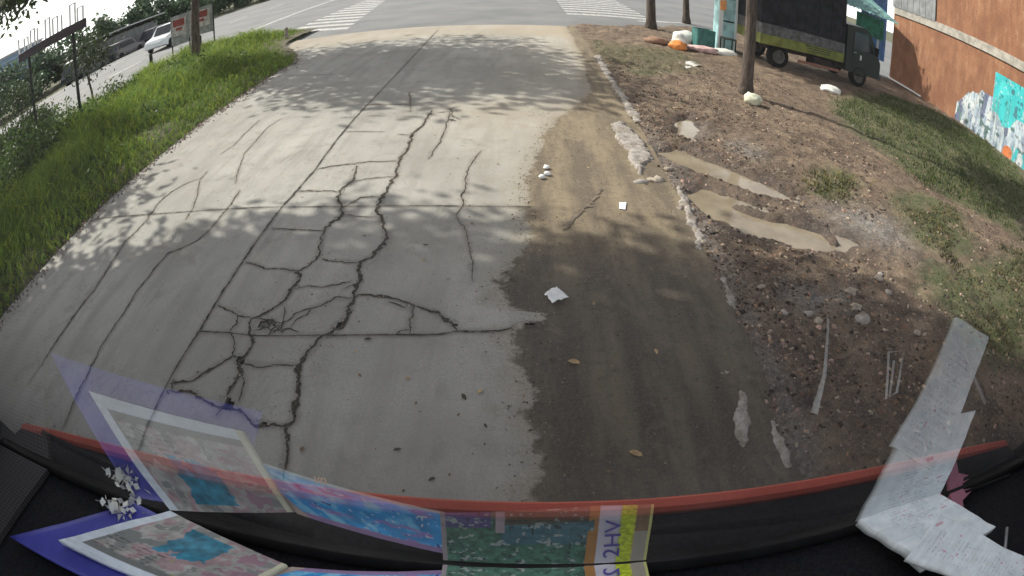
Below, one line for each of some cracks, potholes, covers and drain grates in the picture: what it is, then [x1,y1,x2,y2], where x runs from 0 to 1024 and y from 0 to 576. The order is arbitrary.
crack [167,92,458,480]
crack [31,177,202,379]
crack [456,151,481,275]
crack [72,119,280,405]
